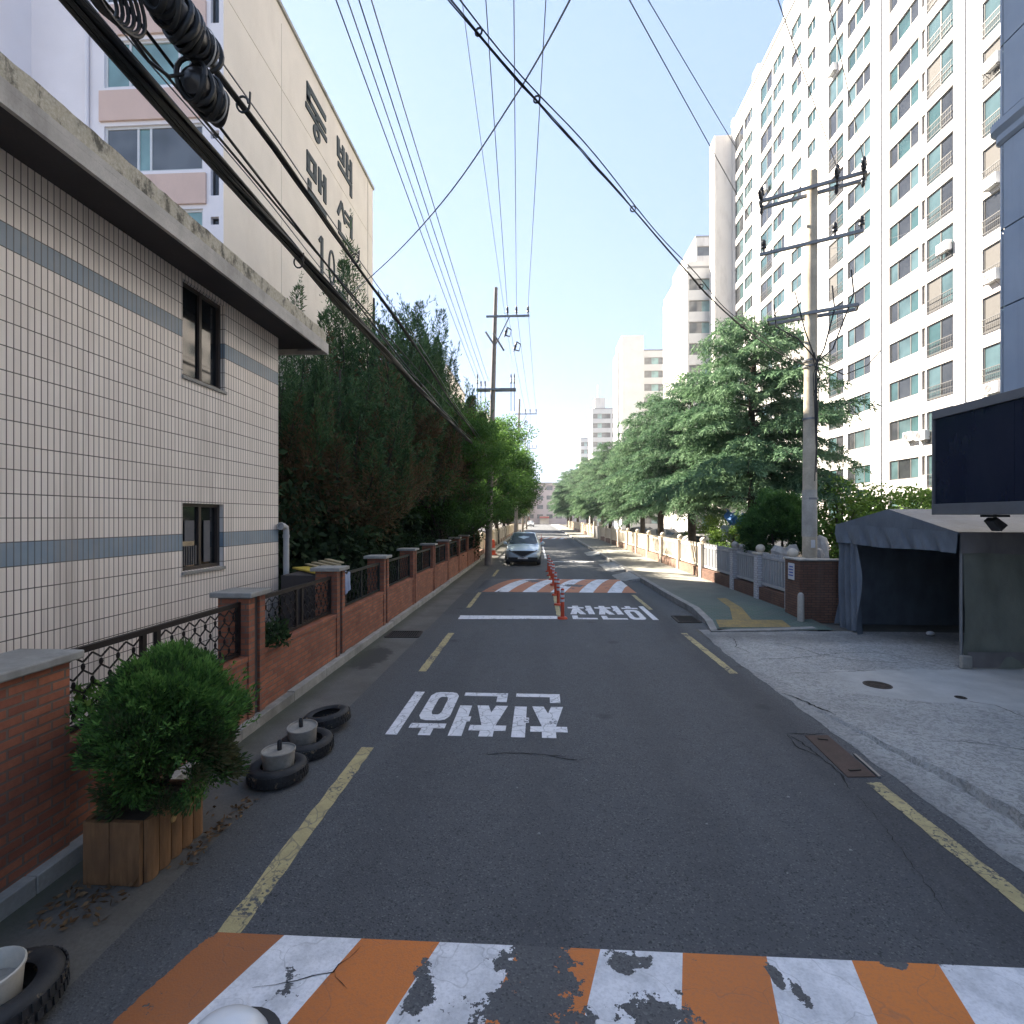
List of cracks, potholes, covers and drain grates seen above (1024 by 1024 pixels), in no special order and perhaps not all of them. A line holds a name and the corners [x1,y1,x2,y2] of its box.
crack [258,946,361,987]
manhole cover [862,681,893,689]
drain grate [671,615,702,623]
crack [489,752,581,760]
